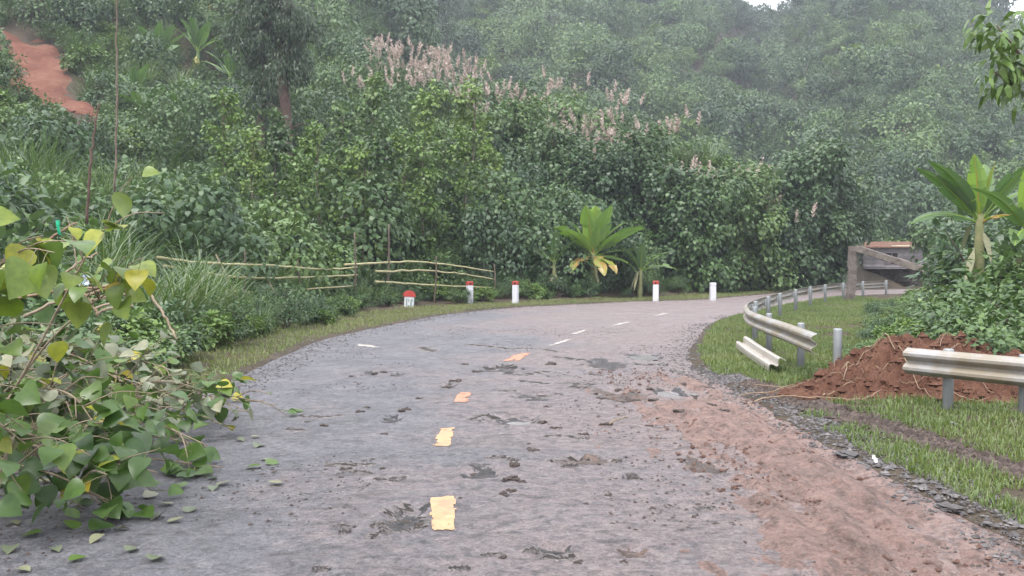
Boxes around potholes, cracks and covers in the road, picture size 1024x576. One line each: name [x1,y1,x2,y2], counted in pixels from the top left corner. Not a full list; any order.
pothole [586,358,629,371]
pothole [481,416,539,425]
pothole [460,463,498,479]
pothole [378,503,431,534]
pothole [591,387,653,402]
pothole [535,545,575,556]
pothole [685,456,729,474]
pothole [652,387,700,399]
pothole [552,454,611,465]
